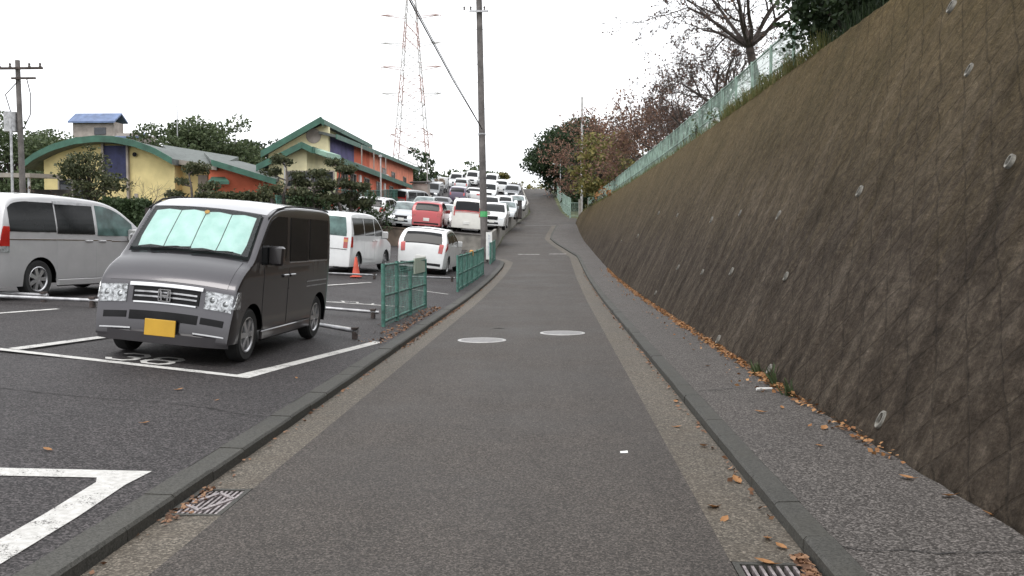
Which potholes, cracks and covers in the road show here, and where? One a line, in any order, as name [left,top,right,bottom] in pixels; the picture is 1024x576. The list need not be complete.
crack [841,545,993,554]
drain grate [732,562,822,576]
drain grate [164,488,252,517]
